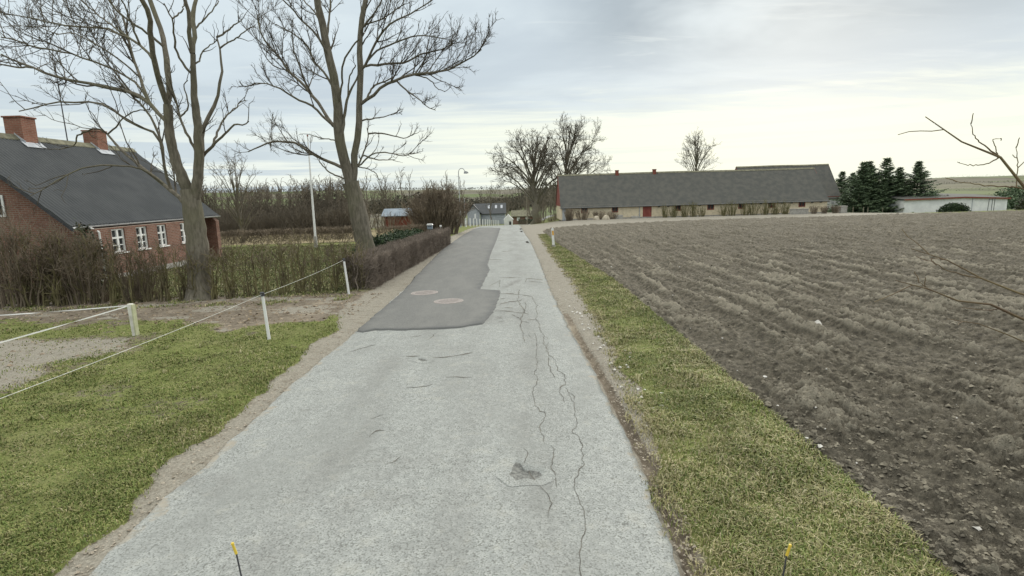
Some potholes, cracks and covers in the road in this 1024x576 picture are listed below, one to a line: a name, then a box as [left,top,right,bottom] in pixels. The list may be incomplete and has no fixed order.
pothole [496,457,556,487]
crack [492,277,586,576]
